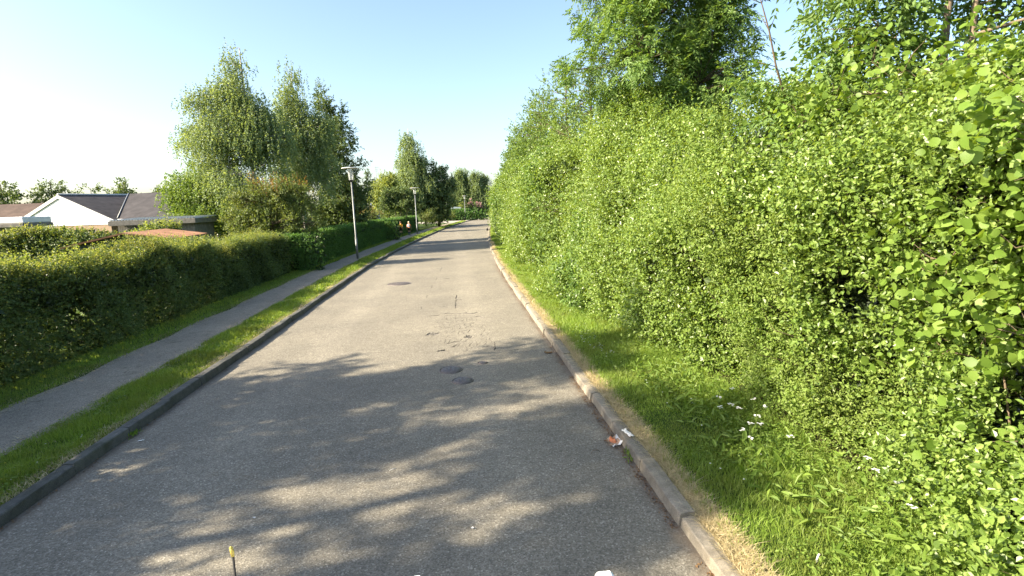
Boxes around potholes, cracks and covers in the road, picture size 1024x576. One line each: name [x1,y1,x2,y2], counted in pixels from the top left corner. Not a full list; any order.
crack [435,278,496,350]
manhole cover [439,366,463,374]
